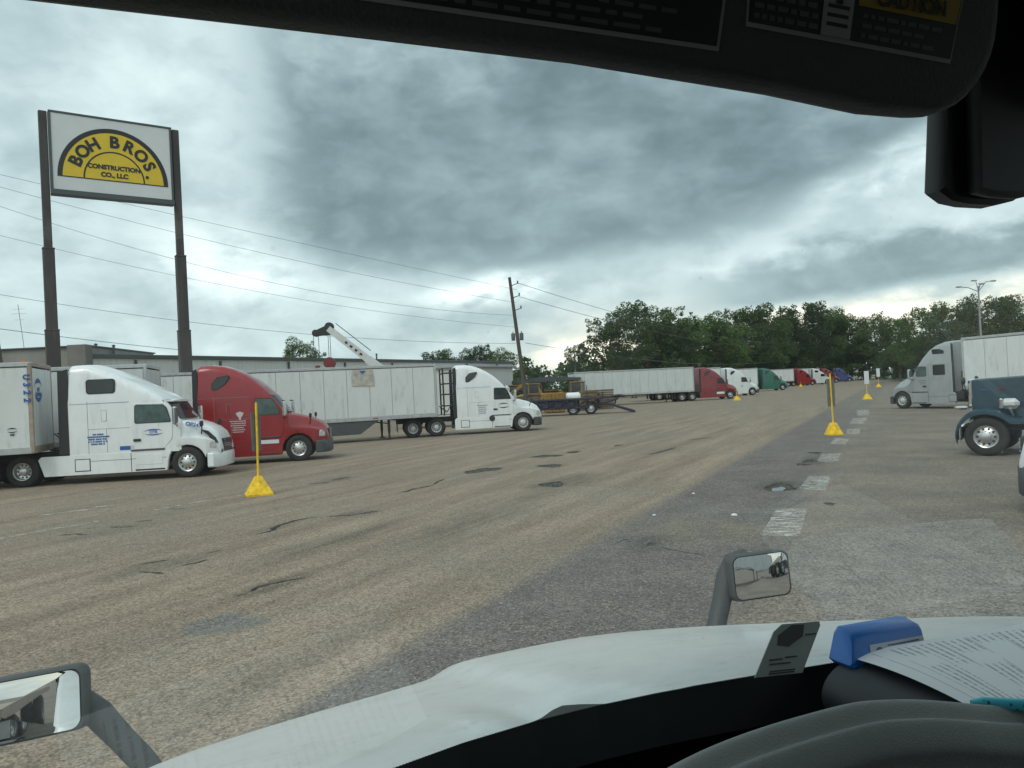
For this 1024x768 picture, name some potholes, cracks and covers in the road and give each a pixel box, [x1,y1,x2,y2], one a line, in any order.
crack [139,550,221,574]
crack [259,511,377,534]
crack [235,577,306,597]
pothole [764,482,797,491]
